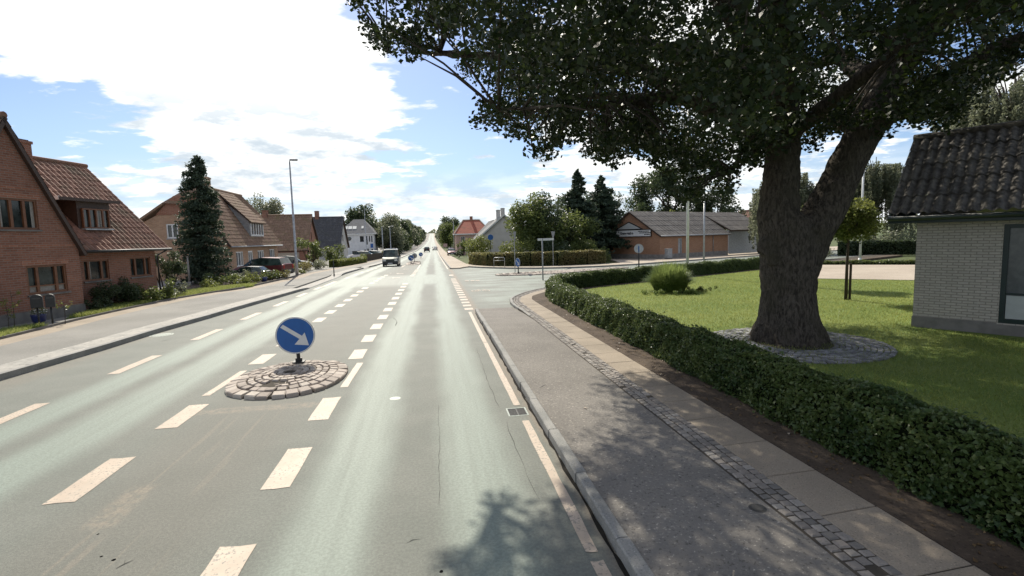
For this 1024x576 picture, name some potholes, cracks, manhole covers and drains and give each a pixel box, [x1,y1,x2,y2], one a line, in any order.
drain grate [506,407,529,417]
utility cover [748,504,767,512]
